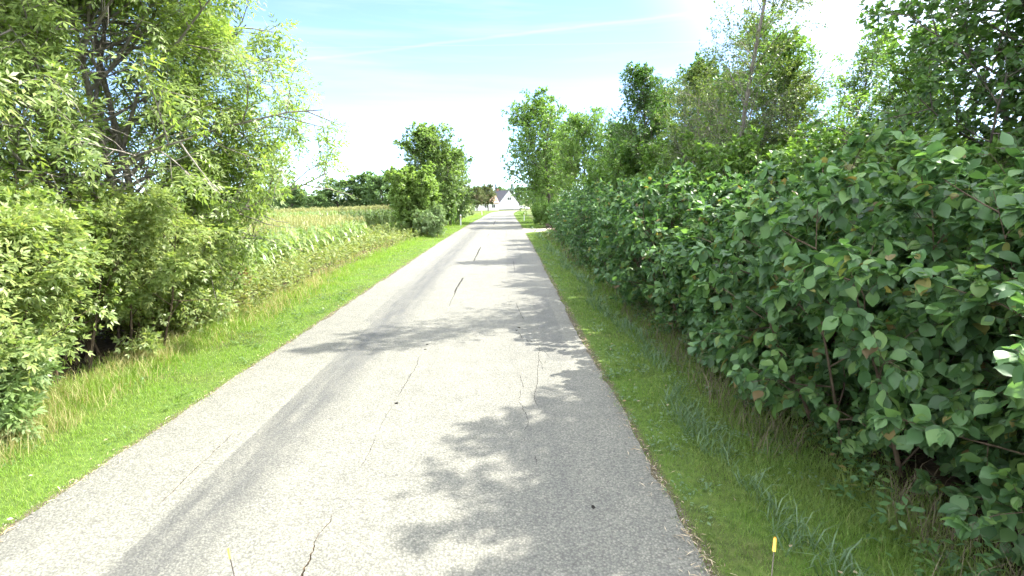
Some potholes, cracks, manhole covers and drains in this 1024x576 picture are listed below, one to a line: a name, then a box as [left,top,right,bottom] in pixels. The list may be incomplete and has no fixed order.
crack [516,304,548,464]
crack [301,513,334,576]
